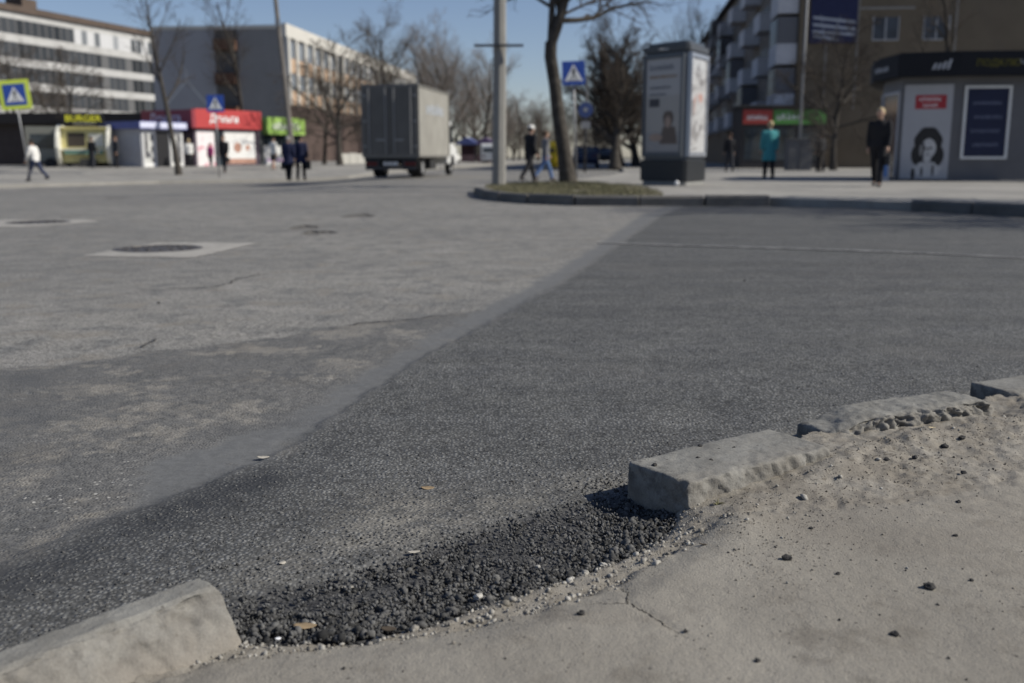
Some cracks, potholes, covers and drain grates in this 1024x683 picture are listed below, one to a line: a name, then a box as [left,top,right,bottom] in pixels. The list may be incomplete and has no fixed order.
crack [603,586,683,636]
manhole cover [83,242,256,257]
manhole cover [0,219,98,227]
